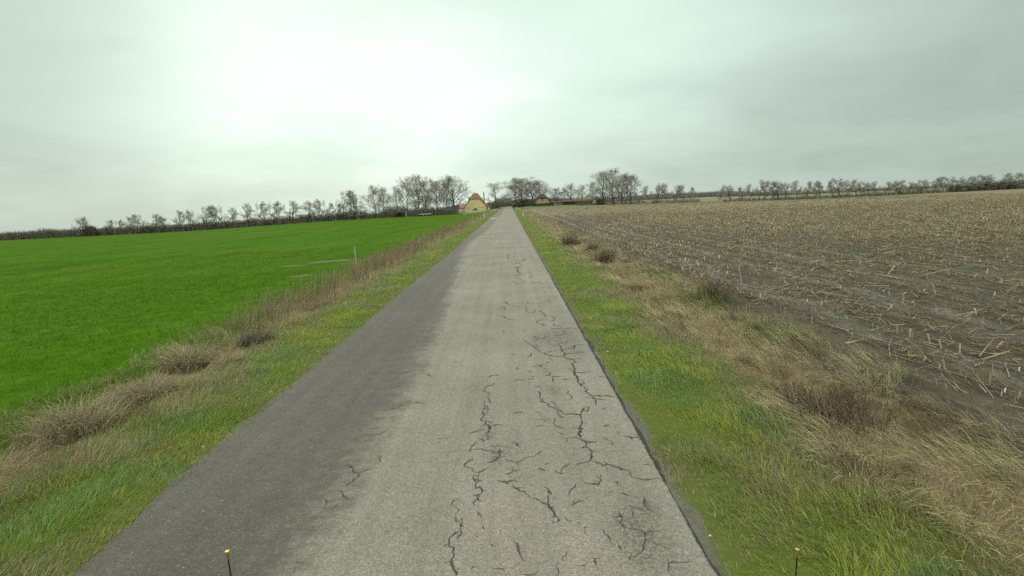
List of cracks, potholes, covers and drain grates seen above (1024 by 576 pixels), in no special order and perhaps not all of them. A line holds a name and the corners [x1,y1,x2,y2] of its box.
crack [364,394,426,436]
crack [312,456,382,518]
crack [444,255,691,576]
